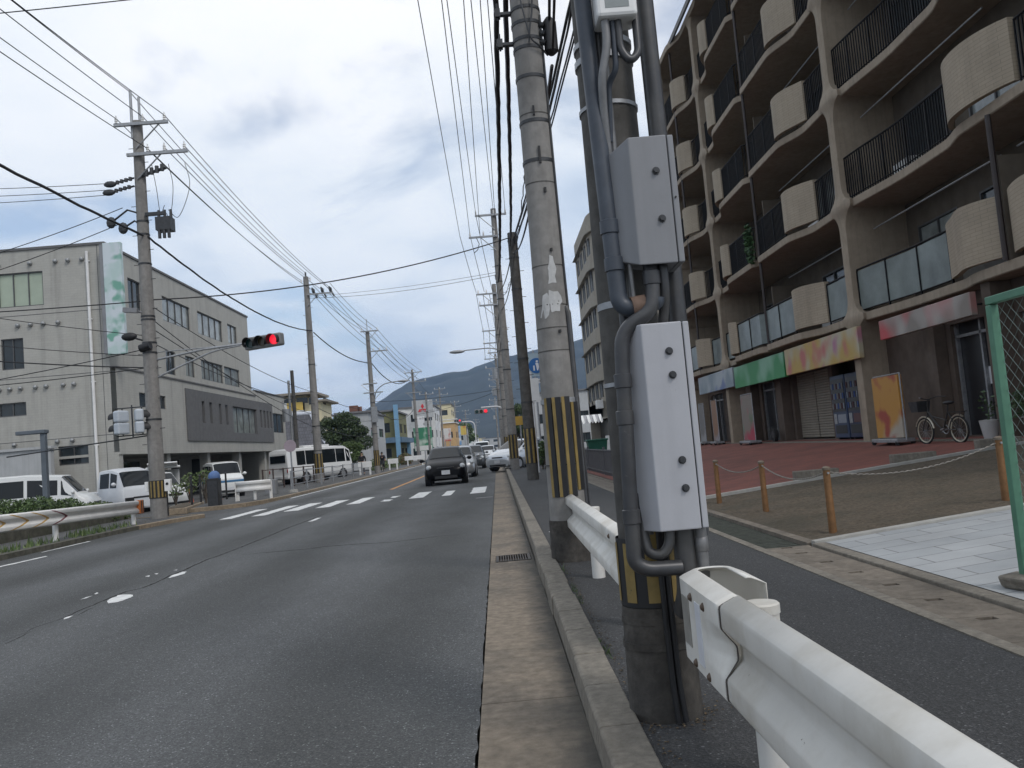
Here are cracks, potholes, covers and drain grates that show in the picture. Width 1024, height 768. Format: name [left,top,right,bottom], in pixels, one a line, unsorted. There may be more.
drain grate [496,553,531,563]
